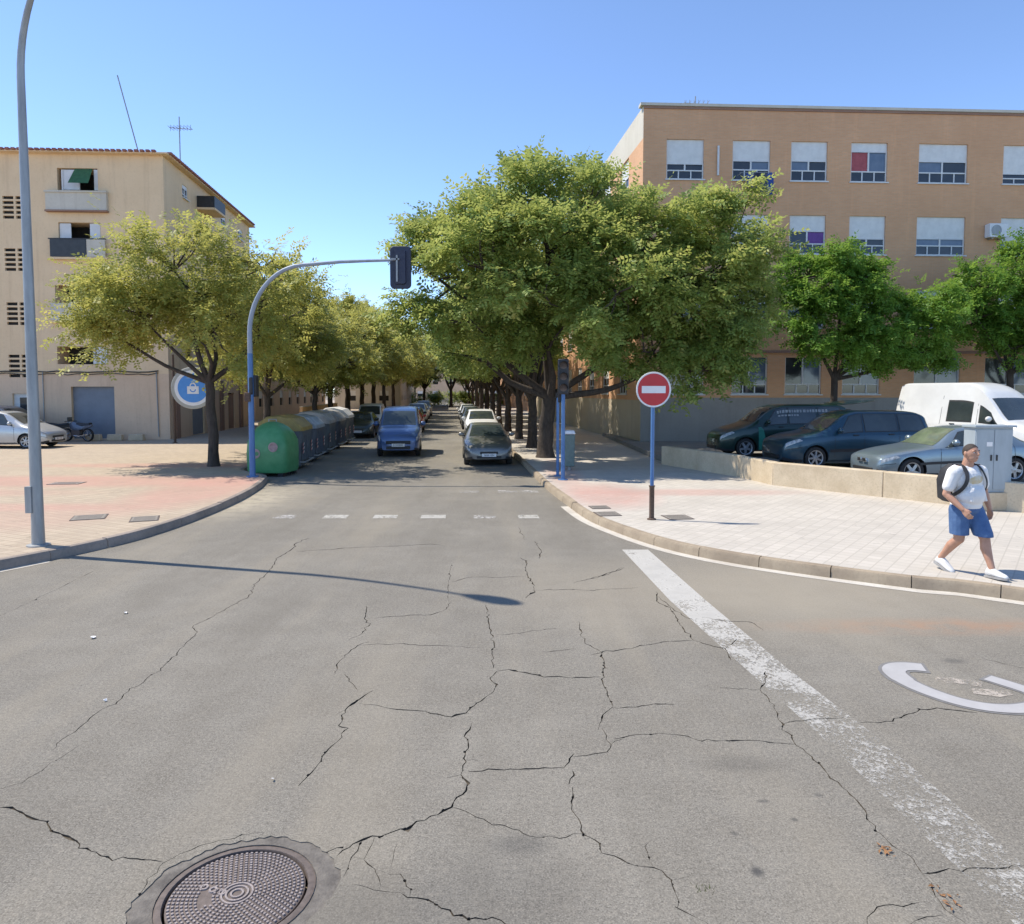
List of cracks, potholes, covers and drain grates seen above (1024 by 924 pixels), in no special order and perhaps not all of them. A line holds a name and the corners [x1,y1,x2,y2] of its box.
crack [1,806,265,895]
crack [326,607,786,924]
crack [4,528,763,788]
crack [720,673,1022,924]
manhole cover [125,836,341,924]
